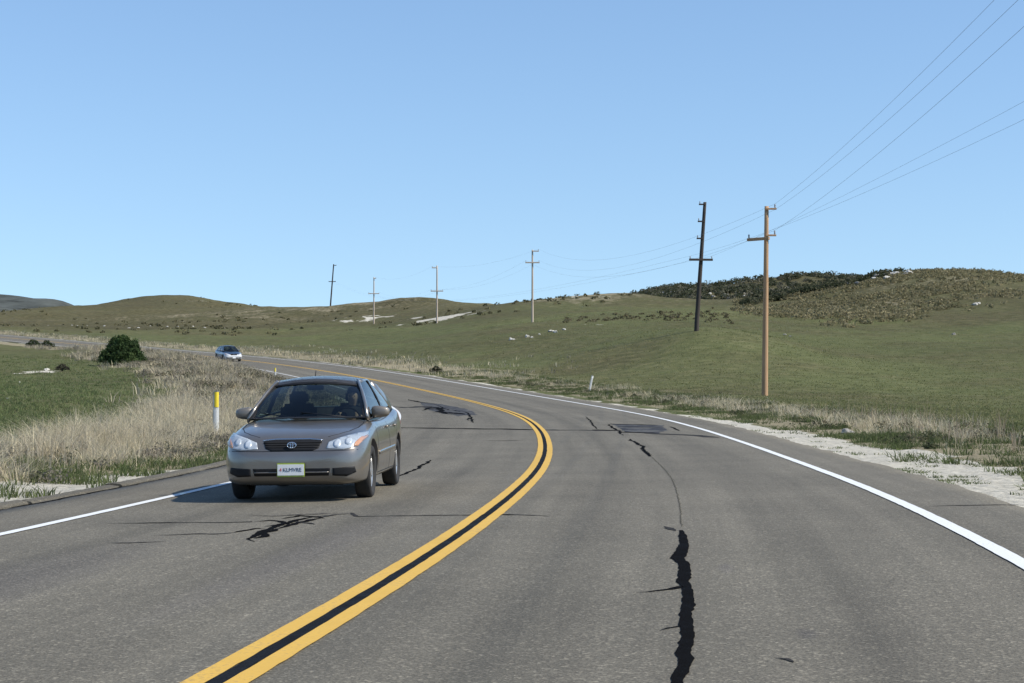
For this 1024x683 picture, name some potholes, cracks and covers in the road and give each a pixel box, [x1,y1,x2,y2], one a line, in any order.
crack [634,526,696,683]
crack [119,512,545,543]
crack [393,399,714,441]
